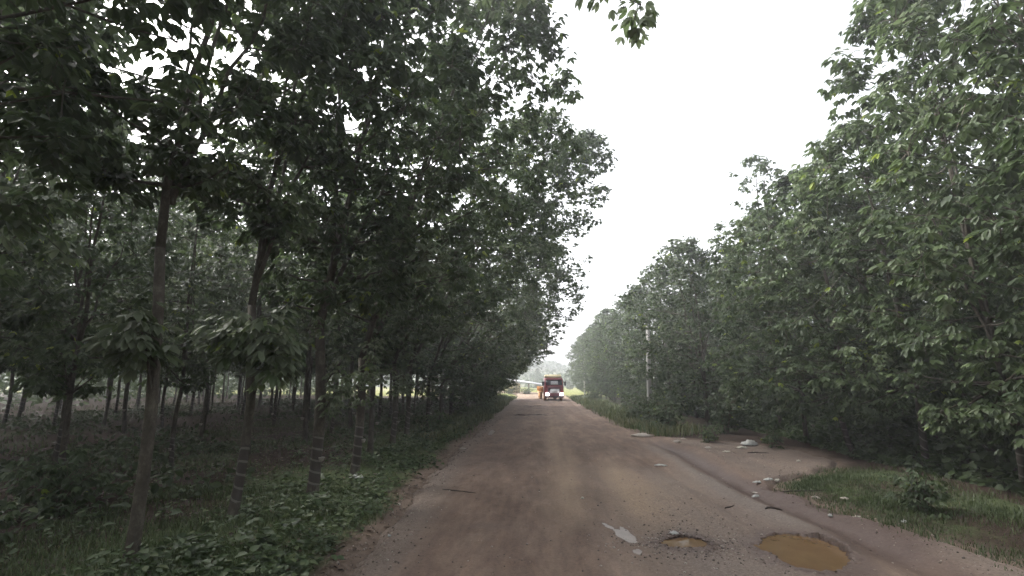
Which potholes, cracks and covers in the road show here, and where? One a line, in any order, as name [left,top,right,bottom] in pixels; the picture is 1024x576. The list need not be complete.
pothole [746,531,863,575]
pothole [649,532,718,551]
